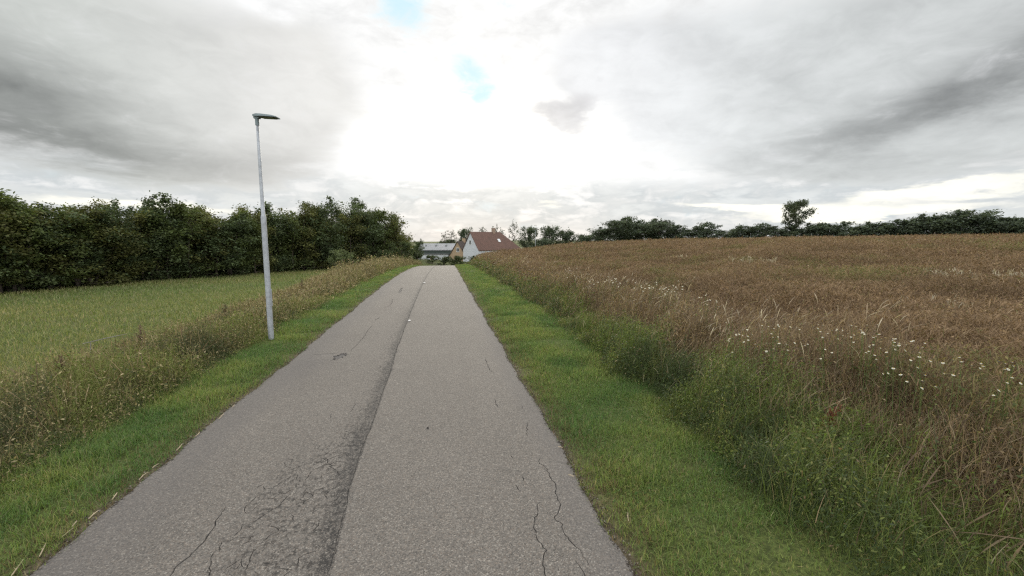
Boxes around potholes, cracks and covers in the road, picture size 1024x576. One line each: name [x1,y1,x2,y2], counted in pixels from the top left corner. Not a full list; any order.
crack [170,405,355,576]
crack [516,459,589,576]
